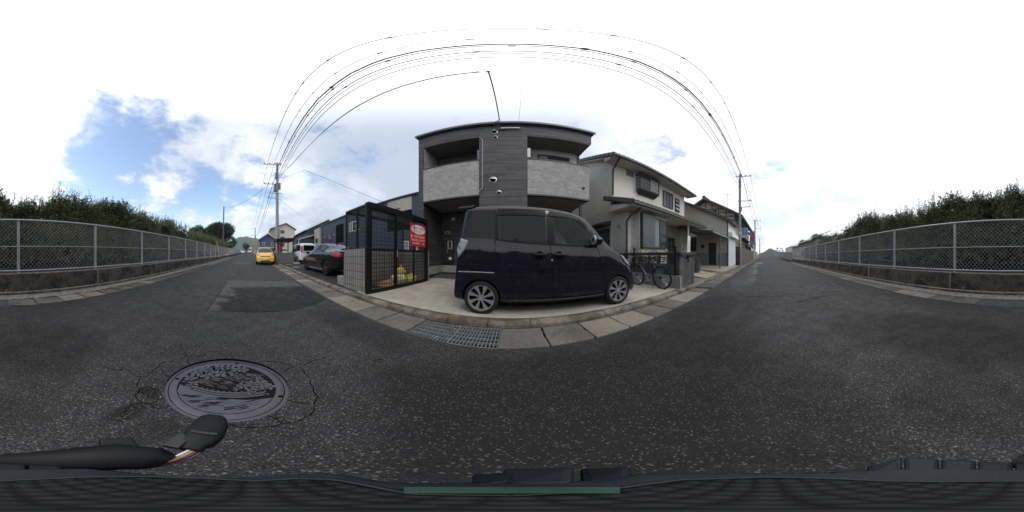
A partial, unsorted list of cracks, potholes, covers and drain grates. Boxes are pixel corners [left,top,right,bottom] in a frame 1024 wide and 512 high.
pothole [139,386,163,400]
drain grate [447,326,501,349]
manhole cover [163,360,289,422]
crack [104,344,329,428]
drain grate [406,320,461,343]
